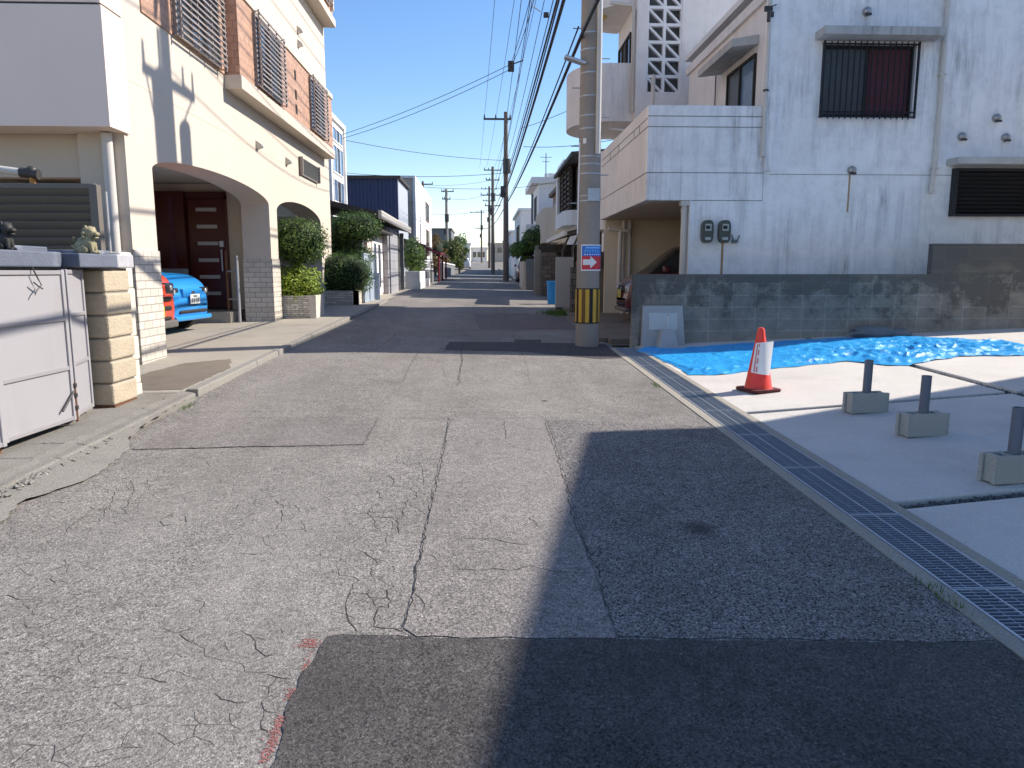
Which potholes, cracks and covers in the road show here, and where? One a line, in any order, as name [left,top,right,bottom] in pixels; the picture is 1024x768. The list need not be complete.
drain grate [627,356,661,366]
crack [370,313,530,386]
drain grate [615,347,647,356]
drain grate [640,365,681,377]
drain grate [656,377,705,392]
drain grate [677,392,734,410]
drain grate [847,513,1018,589]
crack [13,625,309,768]
drain grate [950,587,1024,642]
crack [64,444,353,554]
crack [320,418,450,638]
drain grate [736,434,825,467]
